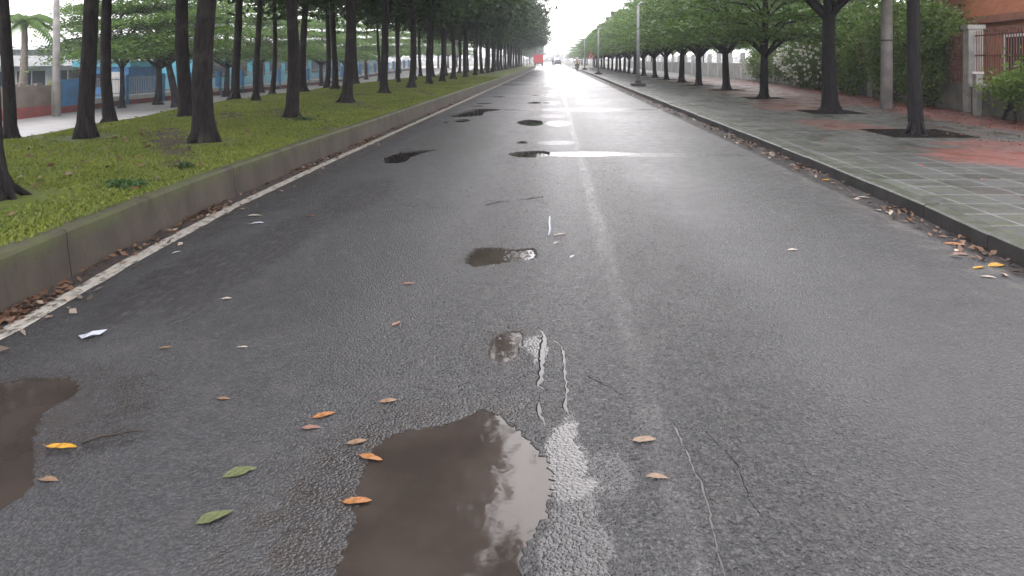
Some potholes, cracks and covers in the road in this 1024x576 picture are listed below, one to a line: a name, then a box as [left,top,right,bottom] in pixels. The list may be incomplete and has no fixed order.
crack [485,196,547,206]
pothole [381,149,436,163]
pothole [488,331,524,362]
crack [535,328,623,426]
crack [672,421,765,576]
pothole [334,409,556,576]
pothole [447,109,500,117]
pothole [464,247,539,267]
